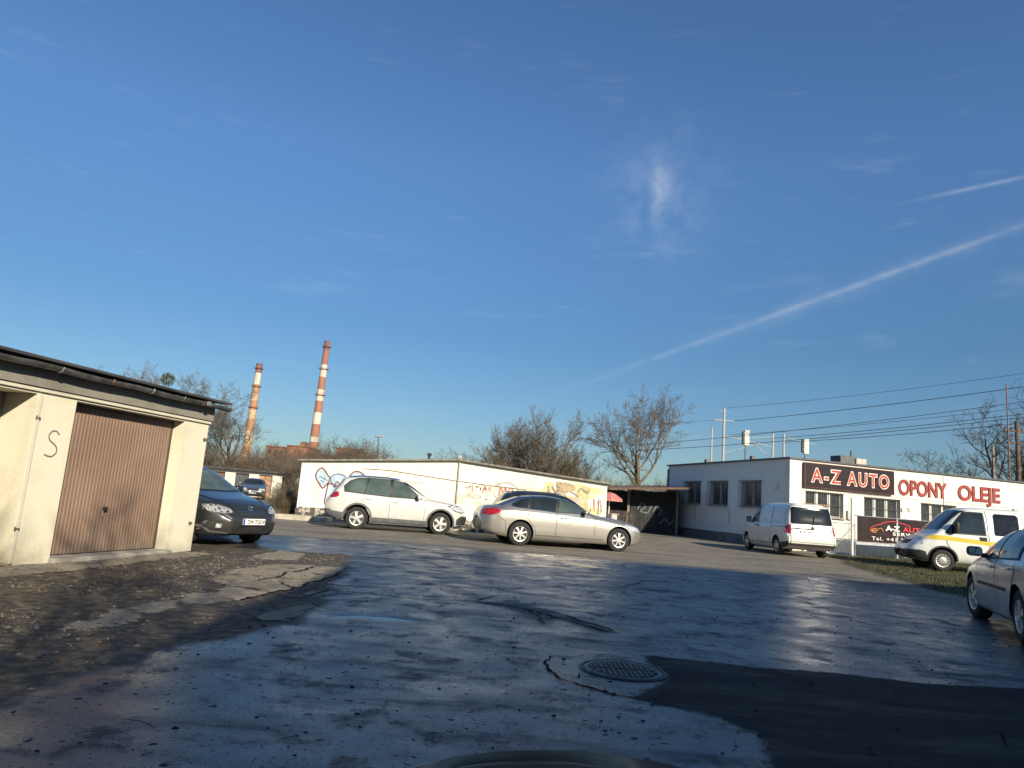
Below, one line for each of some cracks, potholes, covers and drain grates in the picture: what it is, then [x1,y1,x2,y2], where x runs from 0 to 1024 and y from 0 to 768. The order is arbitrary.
manhole cover [579,659,668,682]
crack [543,656,638,699]
crack [221,566,615,632]
